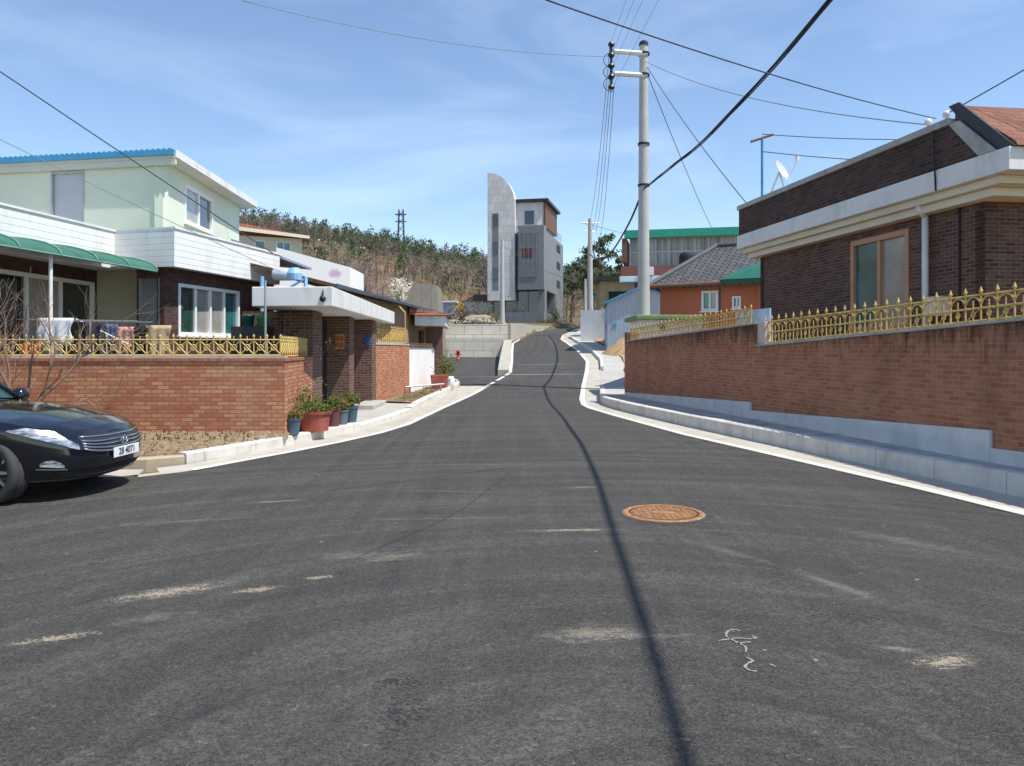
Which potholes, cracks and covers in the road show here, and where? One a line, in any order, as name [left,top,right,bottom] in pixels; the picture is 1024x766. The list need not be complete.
manhole cover [617,504,712,524]
